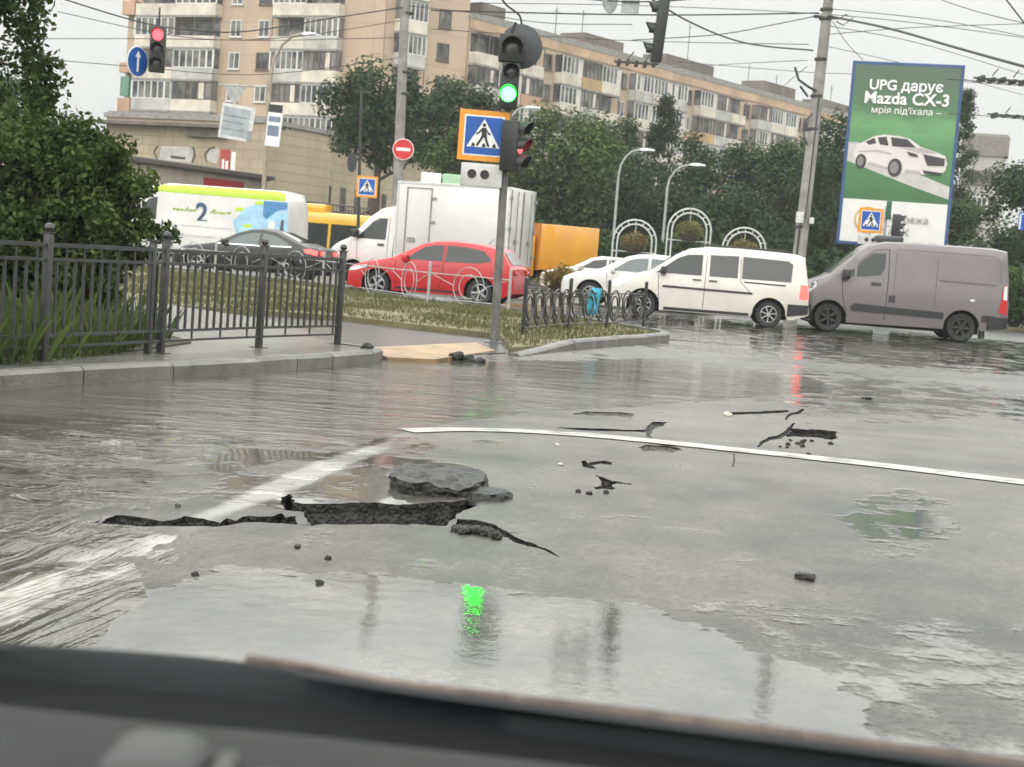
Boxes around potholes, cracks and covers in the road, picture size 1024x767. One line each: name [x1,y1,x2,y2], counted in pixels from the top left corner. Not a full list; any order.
crack [557,422,667,438]
pothole [280,494,477,526]
crack [102,513,298,527]
crack [456,519,559,557]
crack [730,409,805,447]
